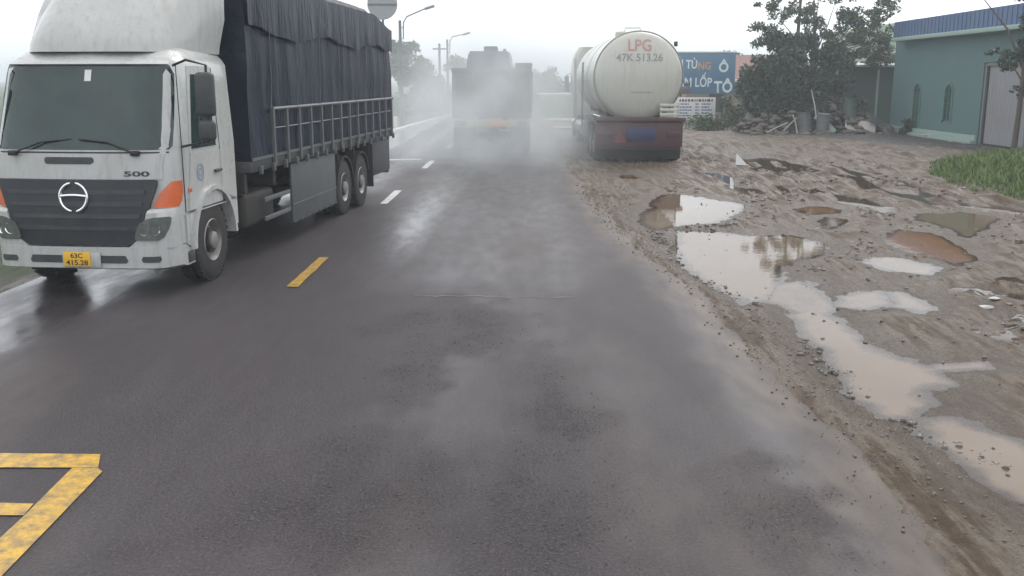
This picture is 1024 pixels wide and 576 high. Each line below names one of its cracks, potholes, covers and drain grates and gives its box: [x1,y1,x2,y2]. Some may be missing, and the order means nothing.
pothole [867,225,996,268]
pothole [622,191,758,233]
pothole [654,227,849,308]
pothole [900,208,1015,239]
